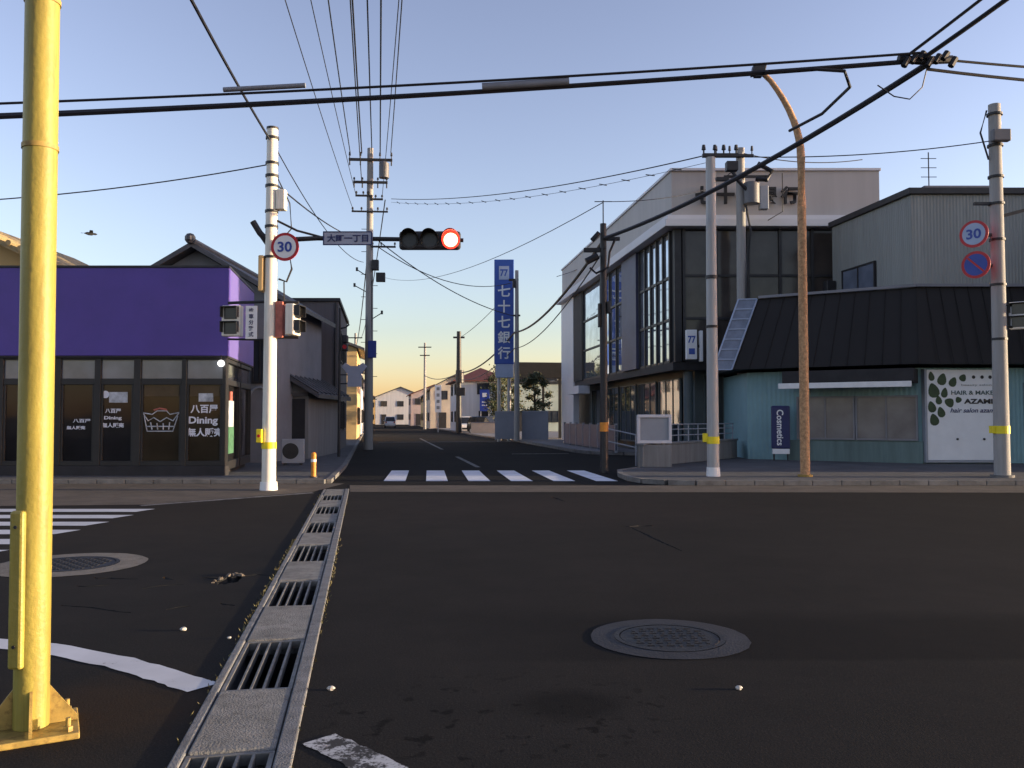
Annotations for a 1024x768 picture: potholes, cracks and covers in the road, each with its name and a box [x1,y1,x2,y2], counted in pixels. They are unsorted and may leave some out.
manhole cover [591,619,751,659]
crack [62,605,131,613]
manhole cover [0,553,148,577]
pothole [211,572,245,584]
crack [621,525,682,551]
